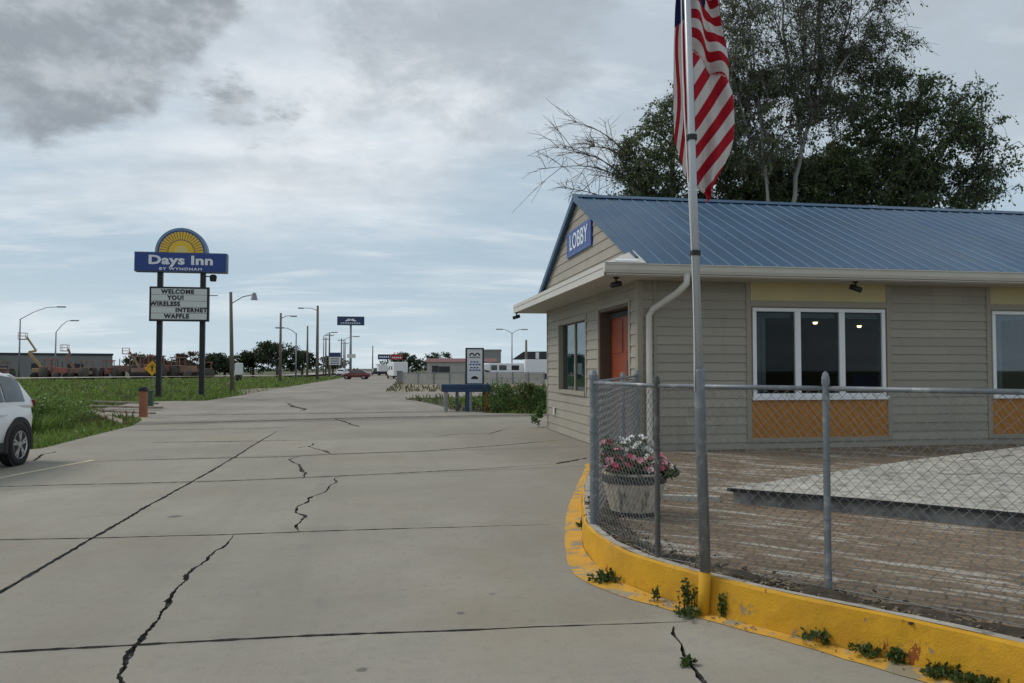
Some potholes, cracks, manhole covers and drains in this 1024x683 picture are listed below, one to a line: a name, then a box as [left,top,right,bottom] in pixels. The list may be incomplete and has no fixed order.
crack [116,535,234,683]
crack [288,443,344,531]
crack [671,627,707,683]
